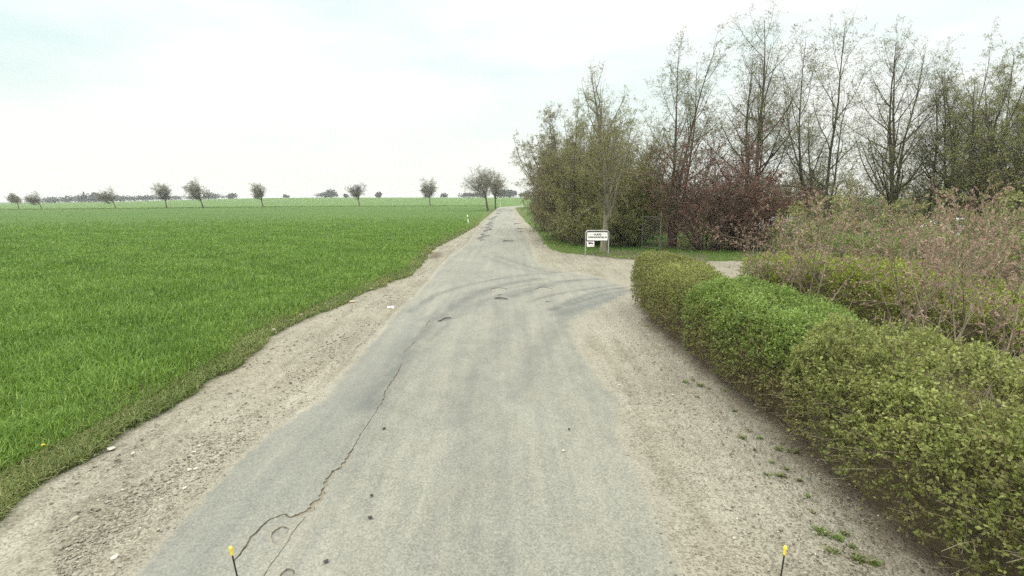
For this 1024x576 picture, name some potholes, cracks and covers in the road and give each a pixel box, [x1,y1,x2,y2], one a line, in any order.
crack [234,321,430,576]
pothole [271,526,289,545]
